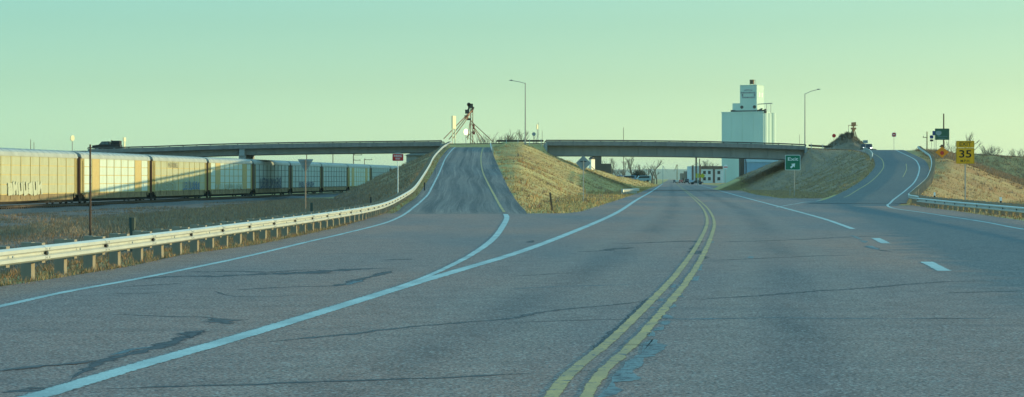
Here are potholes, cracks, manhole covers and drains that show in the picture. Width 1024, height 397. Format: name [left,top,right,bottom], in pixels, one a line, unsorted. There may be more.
crack [581,236,886,261]
crack [695,281,1010,300]
crack [215,271,392,297]
crack [240,300,649,345]
